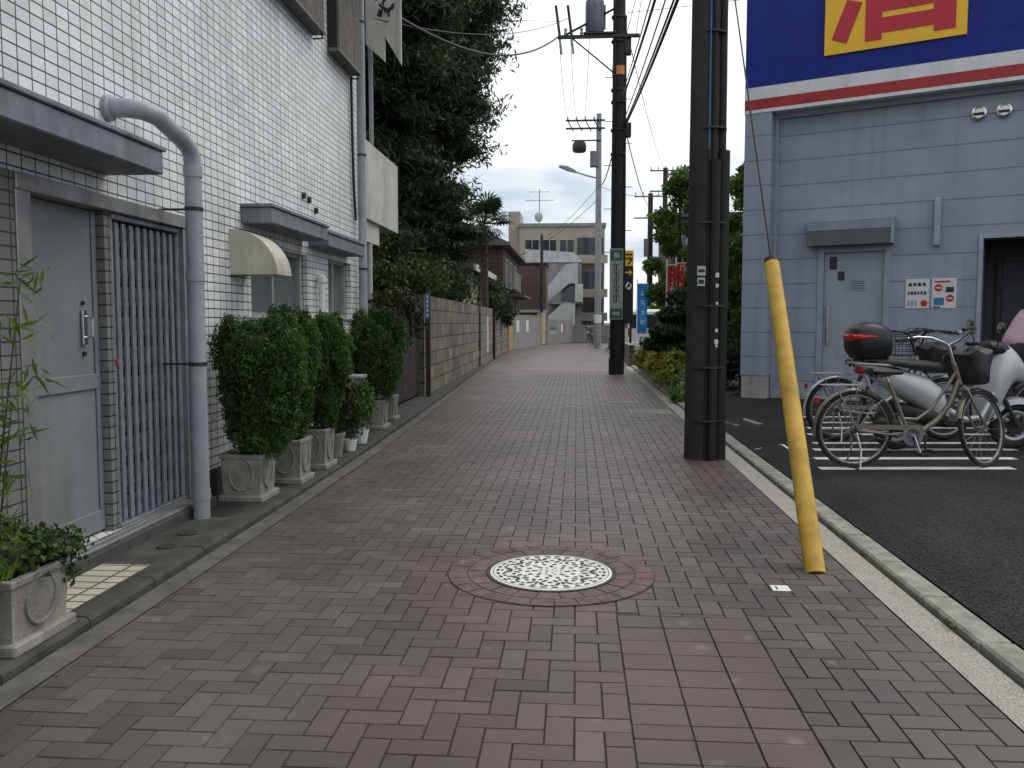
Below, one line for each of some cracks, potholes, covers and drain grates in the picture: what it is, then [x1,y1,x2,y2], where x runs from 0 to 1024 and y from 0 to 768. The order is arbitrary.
manhole cover [487,554,616,592]
